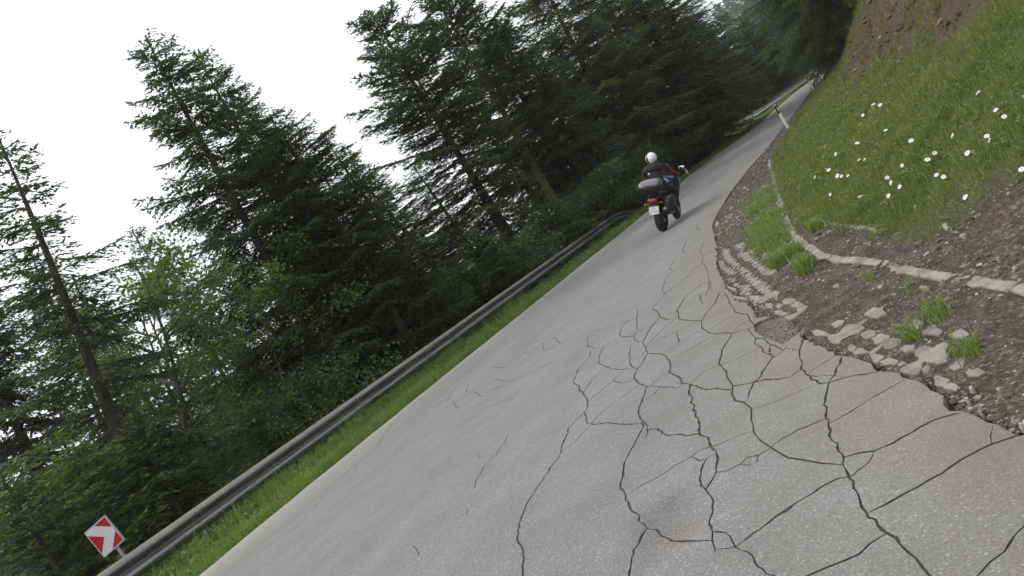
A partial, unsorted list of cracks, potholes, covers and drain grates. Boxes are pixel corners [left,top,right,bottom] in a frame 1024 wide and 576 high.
crack [516,244,1024,576]
crack [452,348,562,409]
pothole [753,314,807,344]
